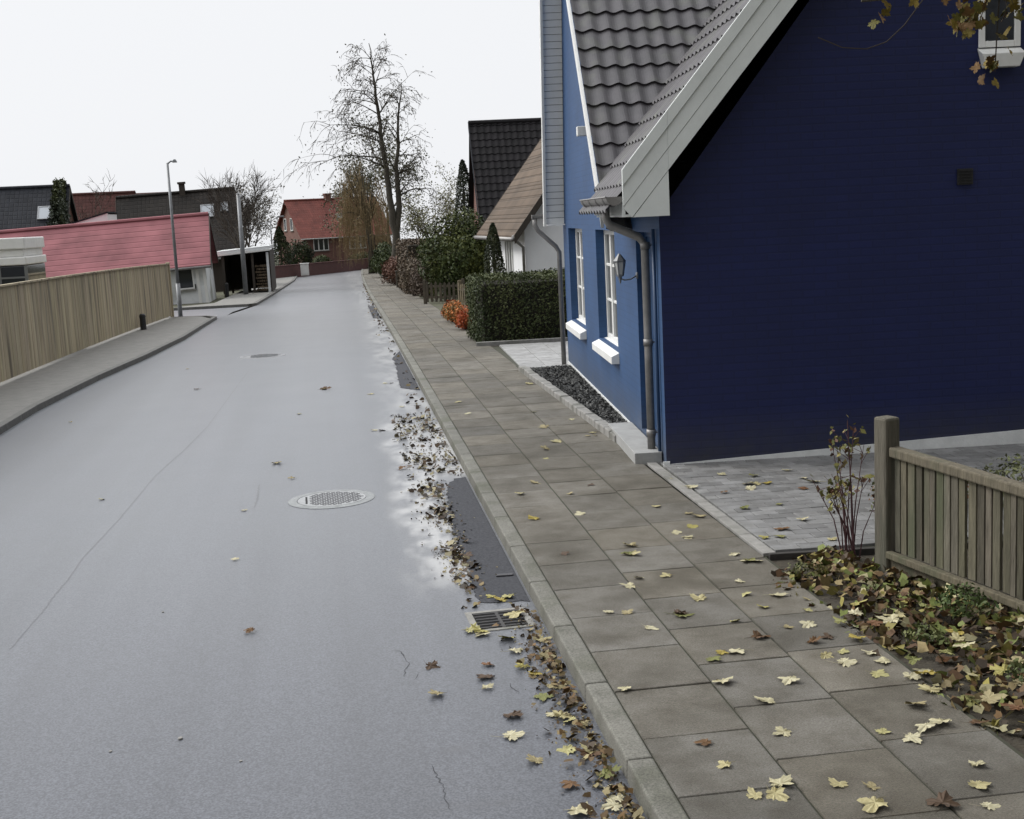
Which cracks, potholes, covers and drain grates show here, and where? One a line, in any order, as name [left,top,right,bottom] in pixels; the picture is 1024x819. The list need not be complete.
drain grate [464,607,535,633]
manhole cover [288,489,375,509]
